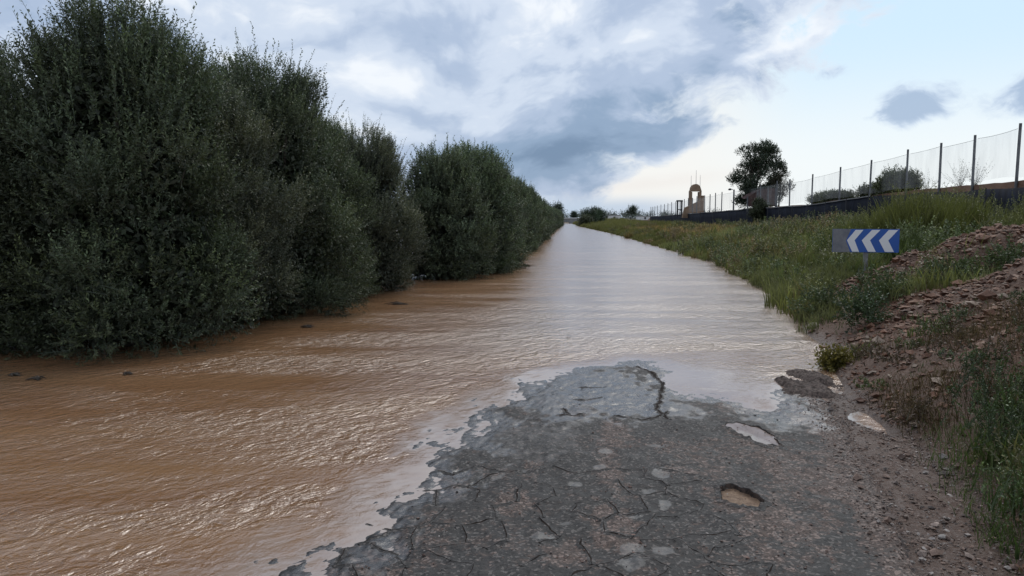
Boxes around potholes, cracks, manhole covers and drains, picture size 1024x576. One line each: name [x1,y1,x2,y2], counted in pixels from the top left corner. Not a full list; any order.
pothole [713,482,772,511]
crack [557,366,671,421]
pothole [718,419,789,451]
